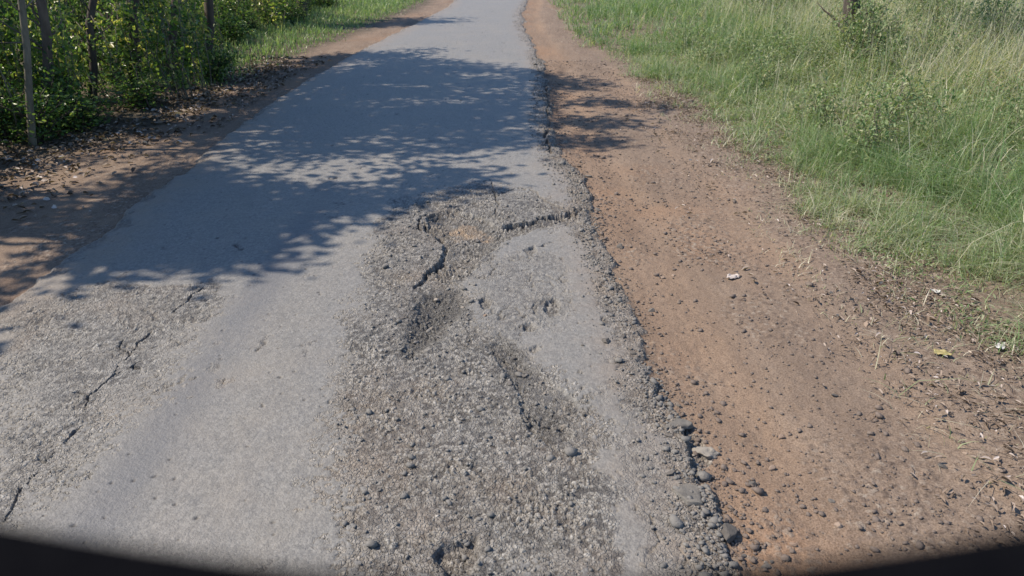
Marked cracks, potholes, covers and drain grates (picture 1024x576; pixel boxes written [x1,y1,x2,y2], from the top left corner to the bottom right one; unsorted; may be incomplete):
crack [3,430,77,522]
crack [72,332,152,410]
pothole [543,296,562,318]
pothole [521,321,539,332]
crack [415,210,462,232]
pothole [484,341,584,450]
pothole [477,296,494,310]
crack [171,287,208,313]
